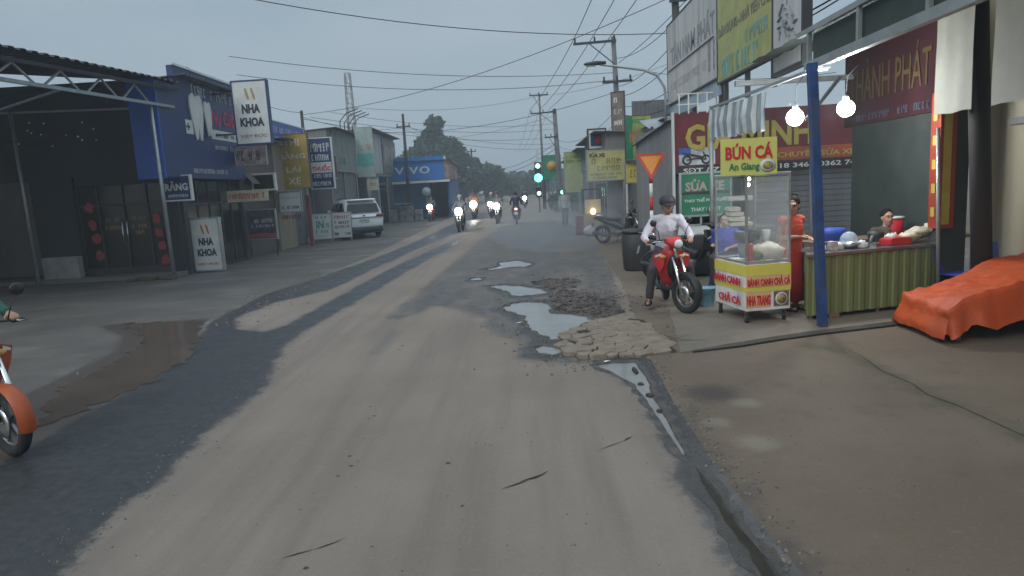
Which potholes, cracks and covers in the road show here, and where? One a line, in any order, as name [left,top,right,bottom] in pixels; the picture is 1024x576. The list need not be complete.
pothole [486,284,553,297]
pothole [499,300,596,341]
crack [809,343,1024,436]
pothole [529,344,562,356]
pothole [479,260,535,270]
crack [502,471,547,489]
